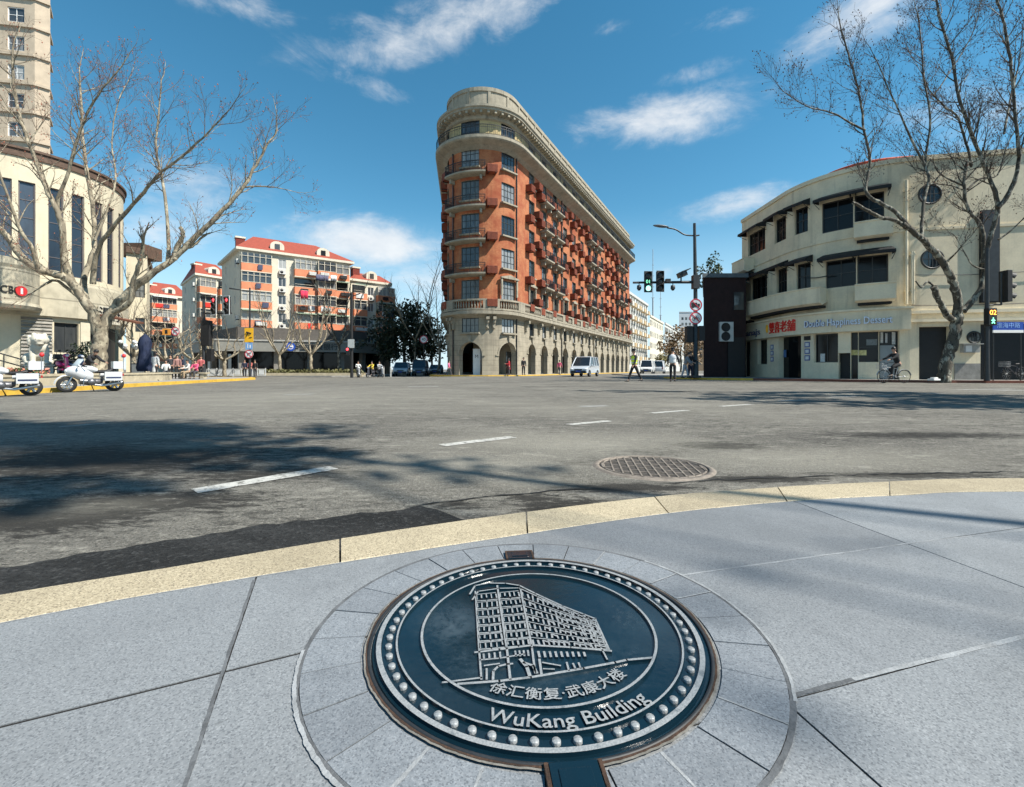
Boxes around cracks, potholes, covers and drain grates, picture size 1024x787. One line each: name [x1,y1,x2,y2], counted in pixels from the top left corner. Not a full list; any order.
manhole cover [363,550,720,787]
manhole cover [593,455,717,482]
